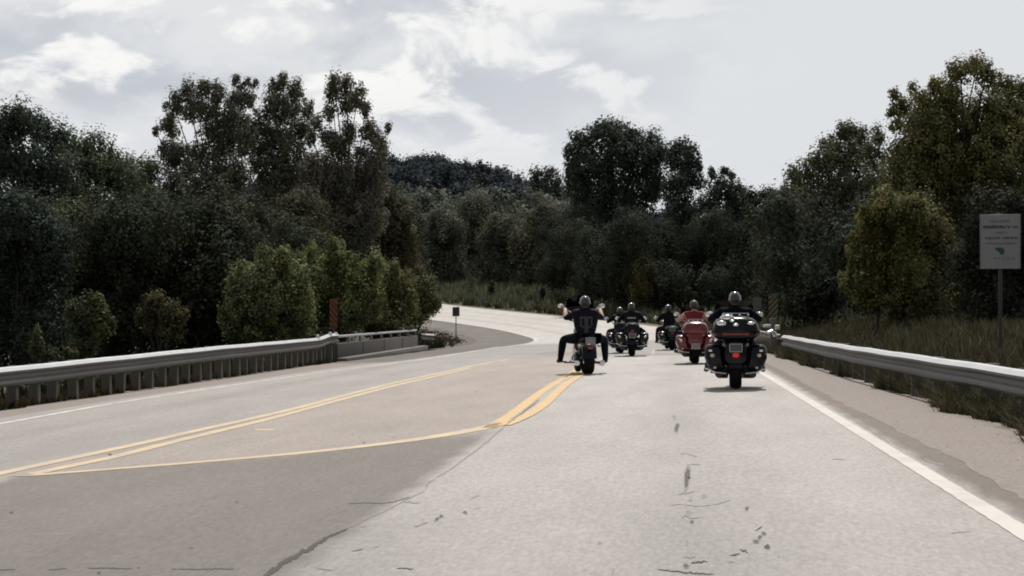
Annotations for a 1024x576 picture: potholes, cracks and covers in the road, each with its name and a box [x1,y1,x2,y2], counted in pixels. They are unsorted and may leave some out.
crack [659,556,712,575]
crack [675,492,729,518]
crack [263,528,379,576]
